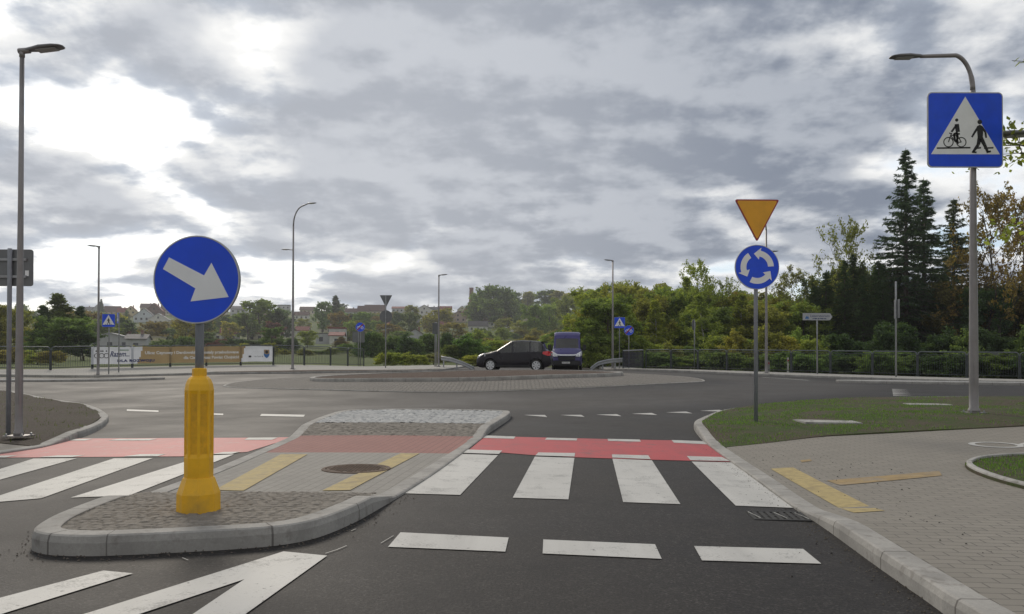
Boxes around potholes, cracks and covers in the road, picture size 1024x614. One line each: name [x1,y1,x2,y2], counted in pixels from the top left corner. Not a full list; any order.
drain grate [746,511,812,522]
manhole cover [321,464,391,474]
